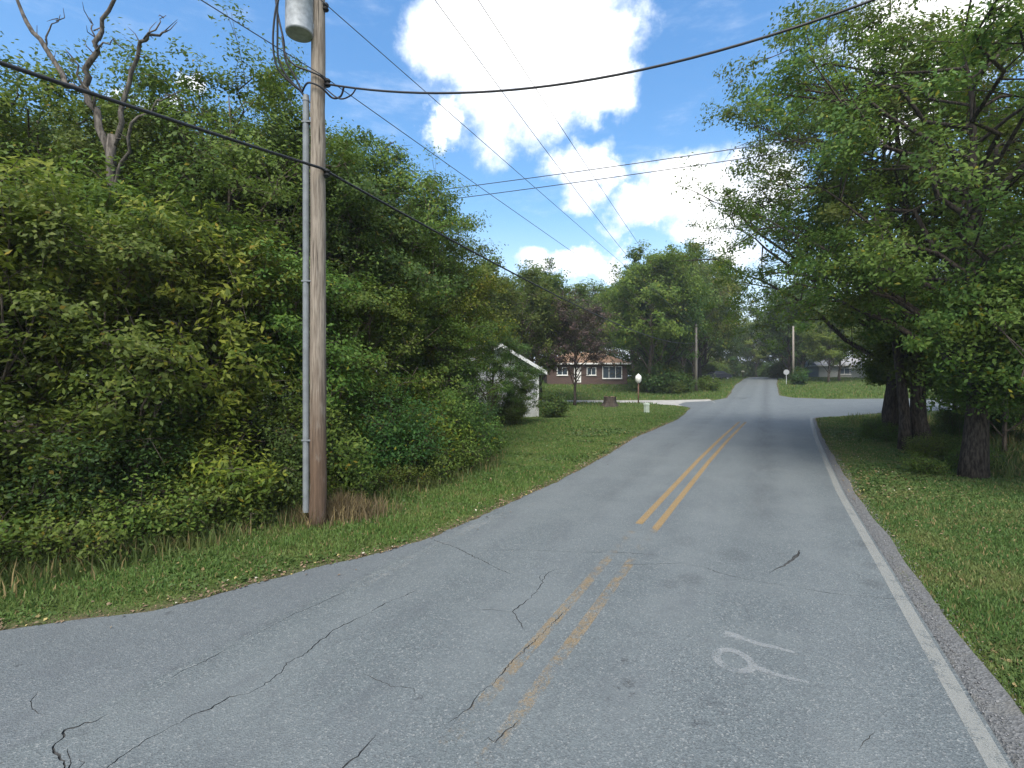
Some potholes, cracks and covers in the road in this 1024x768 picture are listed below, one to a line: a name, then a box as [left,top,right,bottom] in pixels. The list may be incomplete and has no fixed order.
crack [451,571,569,721]
crack [30,591,414,768]
